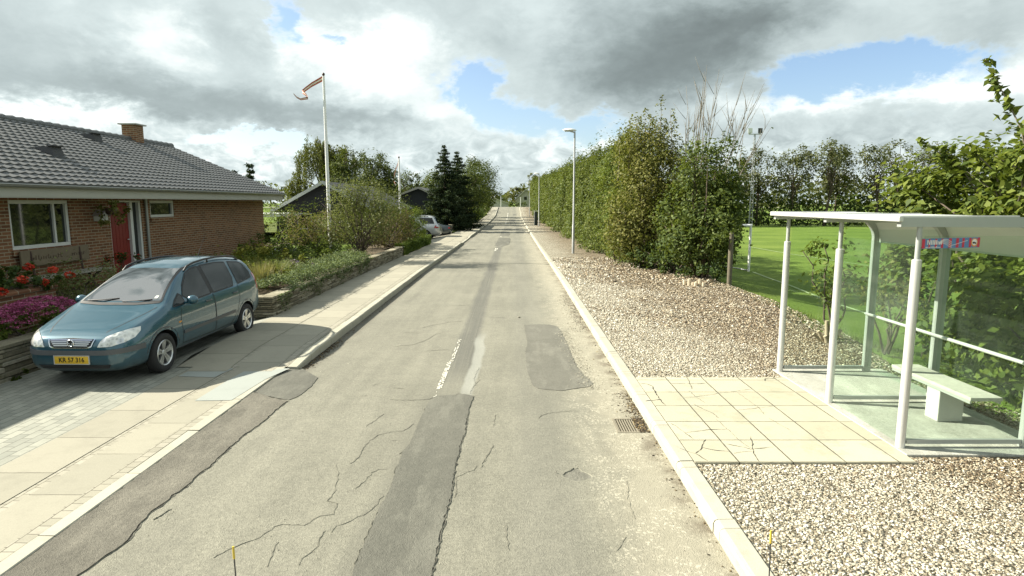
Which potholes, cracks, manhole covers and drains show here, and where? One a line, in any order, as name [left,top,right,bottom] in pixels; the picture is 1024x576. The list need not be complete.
drain grate [611,418,646,433]
crack [79,401,288,575]
crack [214,367,494,576]
pothole [562,467,592,482]
